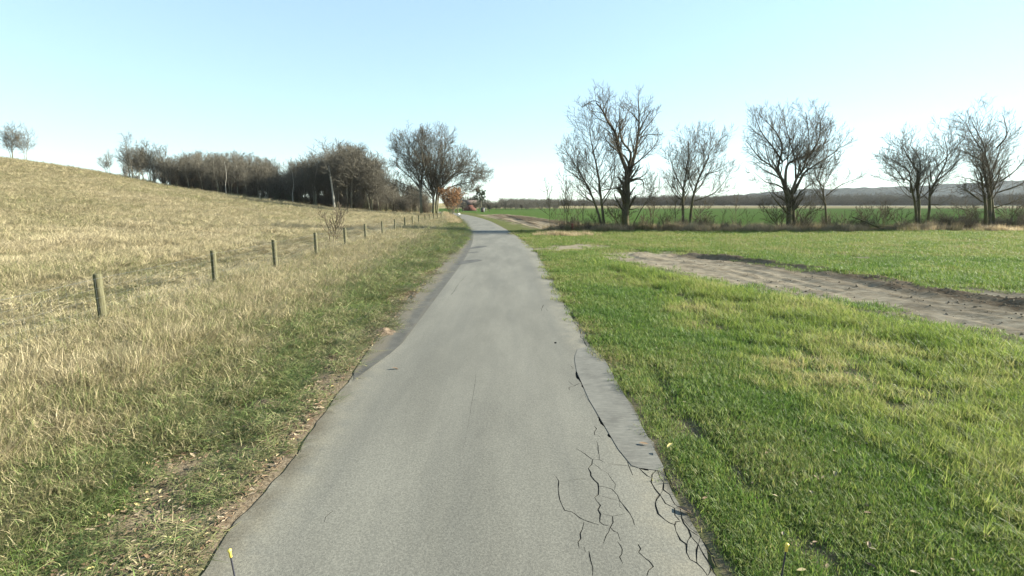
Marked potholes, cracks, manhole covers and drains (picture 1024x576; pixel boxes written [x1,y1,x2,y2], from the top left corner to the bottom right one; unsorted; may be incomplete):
crack [556,383,717,576]
